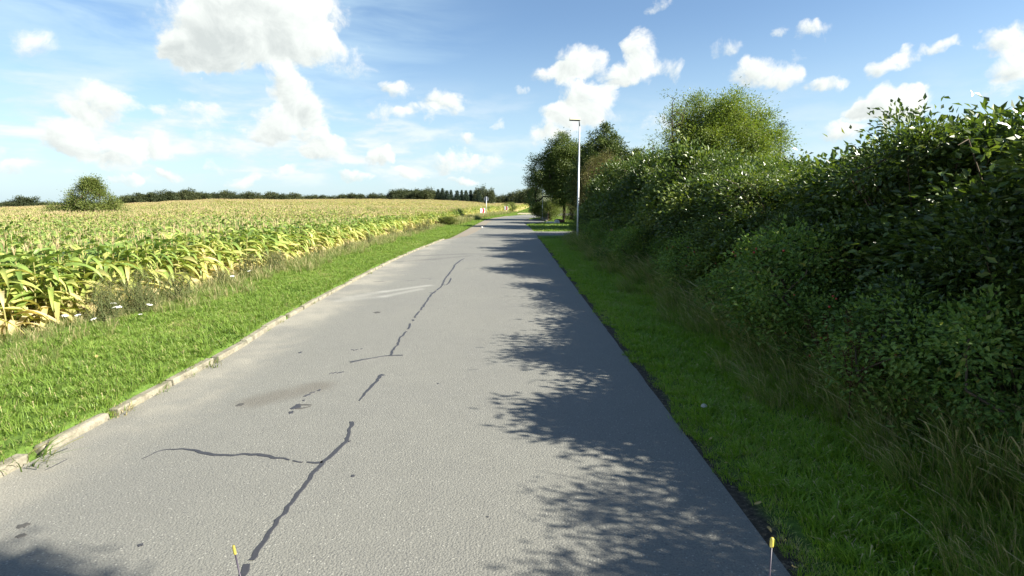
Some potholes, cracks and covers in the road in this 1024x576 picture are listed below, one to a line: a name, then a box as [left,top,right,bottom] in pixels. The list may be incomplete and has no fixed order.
crack [350,258,465,363]
